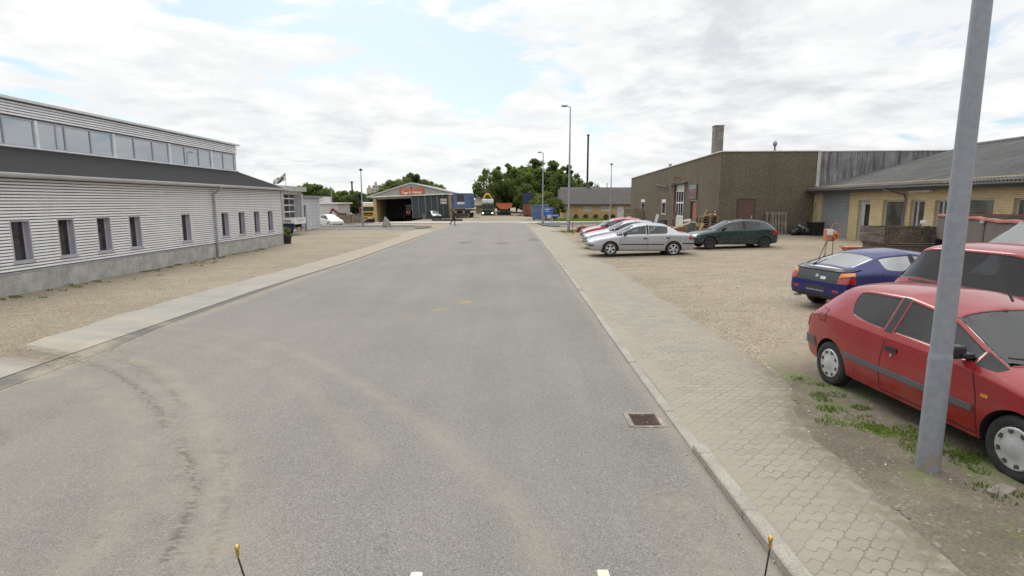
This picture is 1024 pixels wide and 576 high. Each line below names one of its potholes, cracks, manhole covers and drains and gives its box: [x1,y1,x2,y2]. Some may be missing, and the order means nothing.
drain grate [622,412,669,428]
